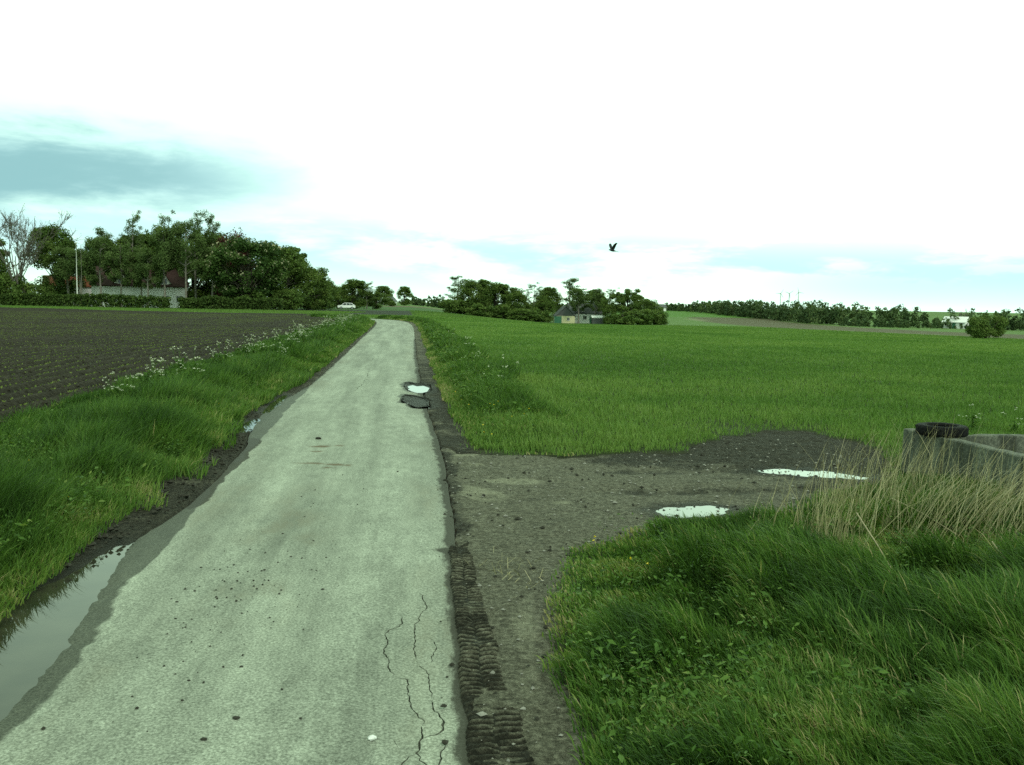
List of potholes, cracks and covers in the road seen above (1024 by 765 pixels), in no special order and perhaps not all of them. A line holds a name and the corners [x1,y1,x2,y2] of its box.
pothole [401,394,429,409]
crack [383,593,448,765]
pothole [404,382,431,394]
